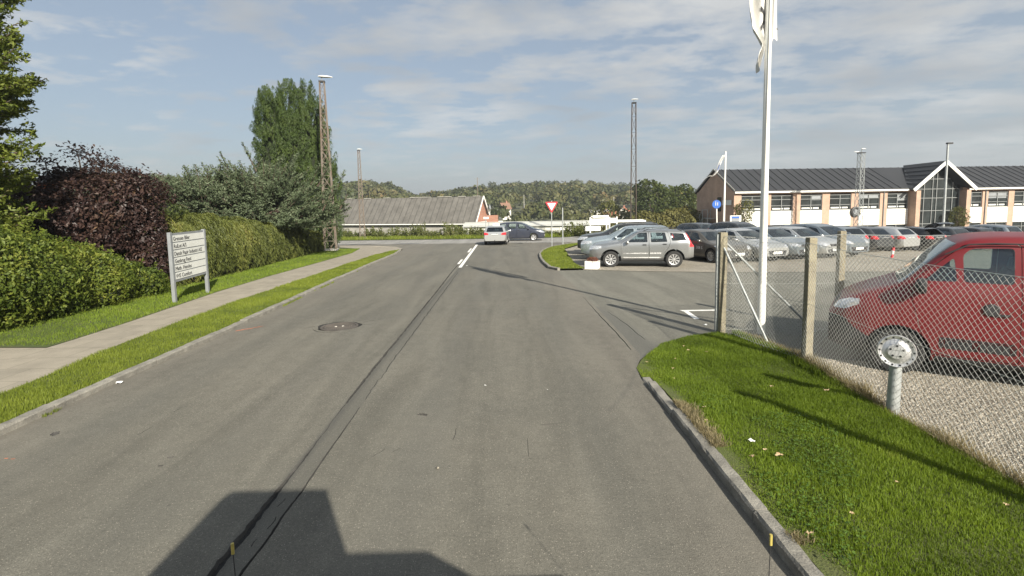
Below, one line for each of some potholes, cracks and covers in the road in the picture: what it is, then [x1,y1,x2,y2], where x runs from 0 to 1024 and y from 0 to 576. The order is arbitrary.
manhole cover [320,322,358,331]
